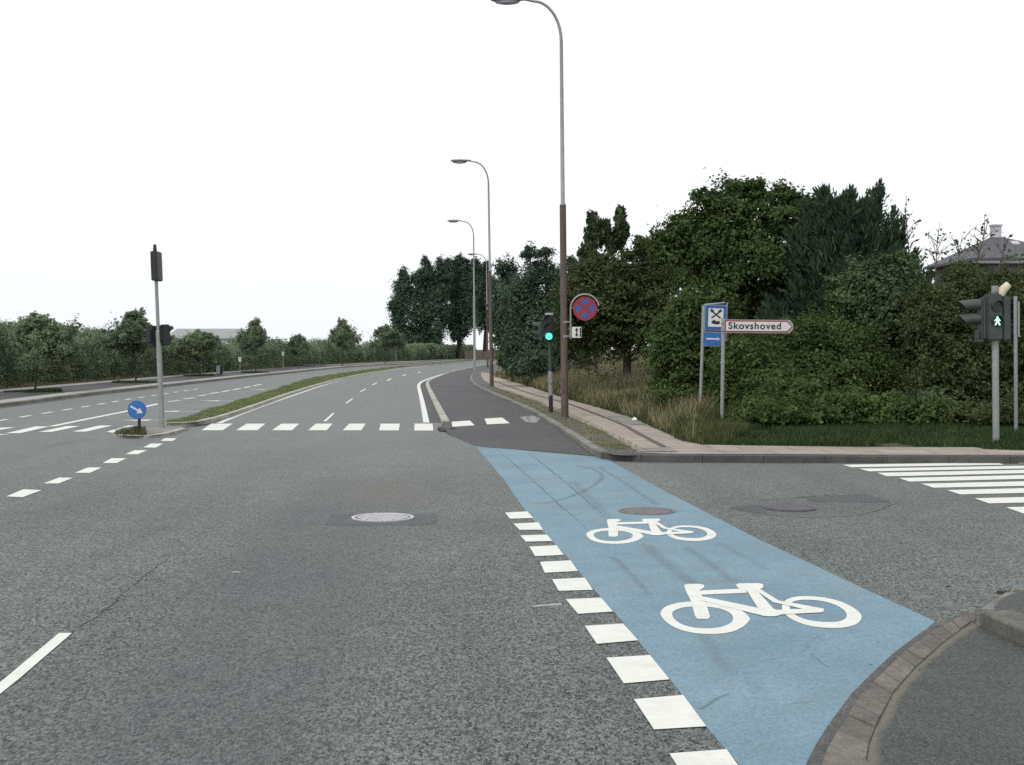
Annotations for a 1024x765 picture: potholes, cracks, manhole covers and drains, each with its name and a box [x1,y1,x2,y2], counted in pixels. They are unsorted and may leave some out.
crack [503,455,594,526]
manhole cover [764,504,816,512]
manhole cover [618,507,676,515]
manhole cover [351,513,414,522]
